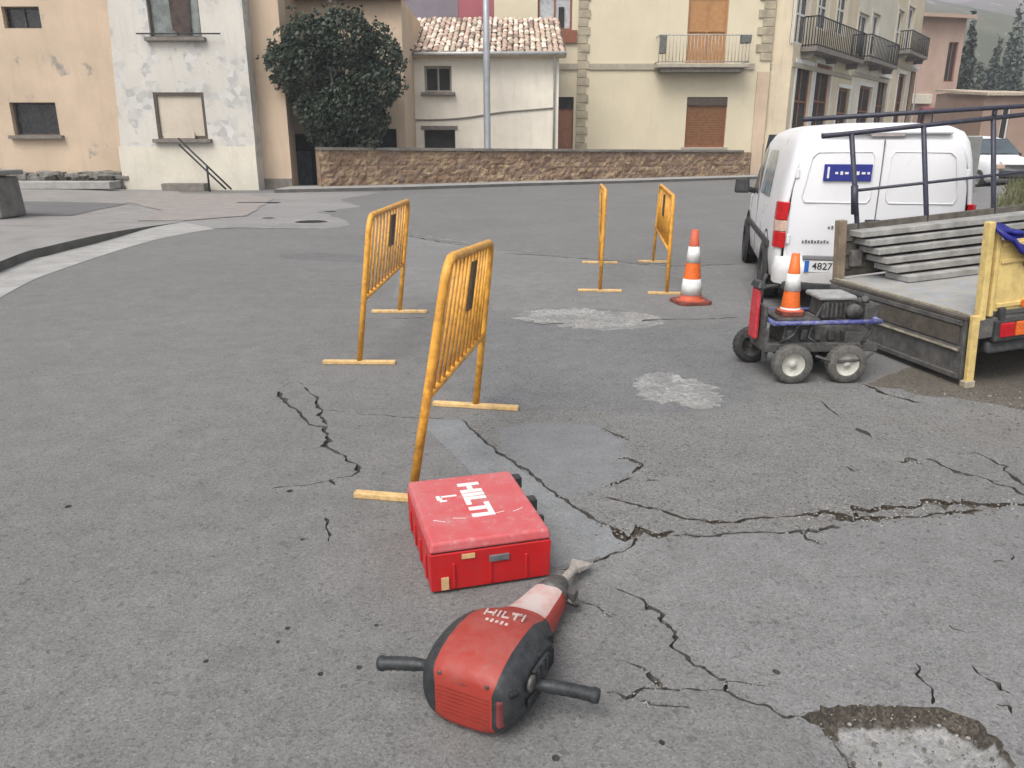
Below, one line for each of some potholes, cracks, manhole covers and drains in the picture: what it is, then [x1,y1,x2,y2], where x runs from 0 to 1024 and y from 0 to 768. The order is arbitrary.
crack [580,589,800,719]
crack [972,665,1012,714]
crack [324,517,332,541]
crack [821,401,872,438]
crack [274,381,445,488]
pothole [798,704,1016,768]
crack [915,663,935,704]
crack [462,419,1024,570]
